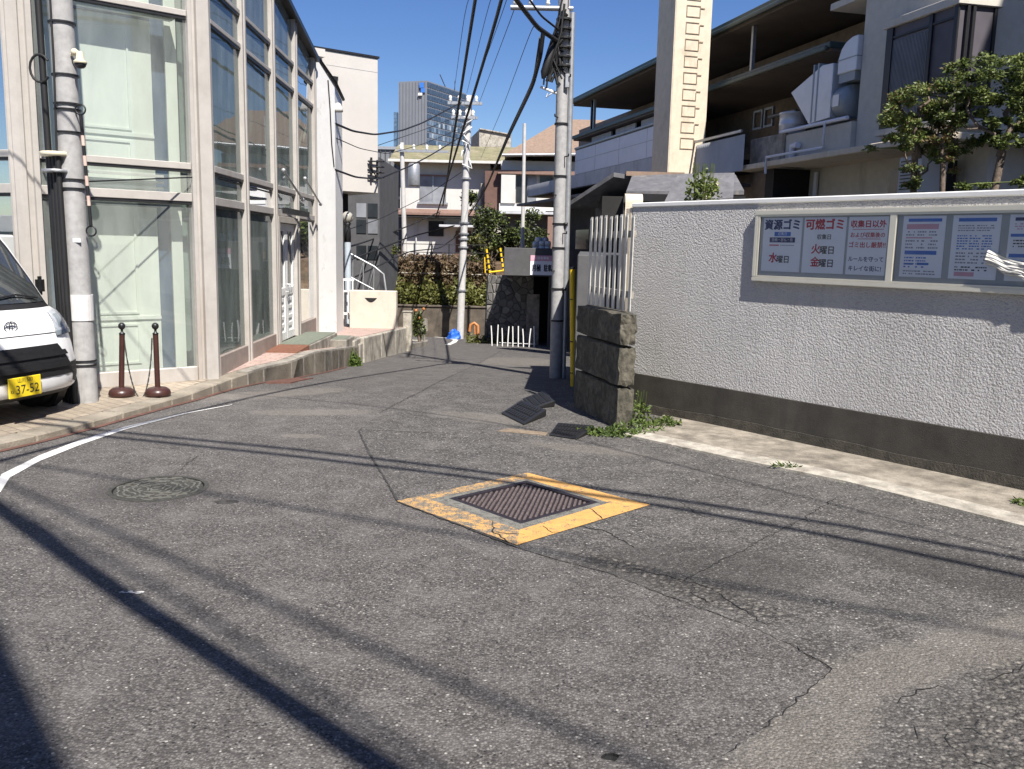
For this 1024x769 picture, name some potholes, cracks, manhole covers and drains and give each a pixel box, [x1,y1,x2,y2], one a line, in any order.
crack [629,498,835,625]
crack [897,664,1024,769]
manhole cover [107,476,209,502]
